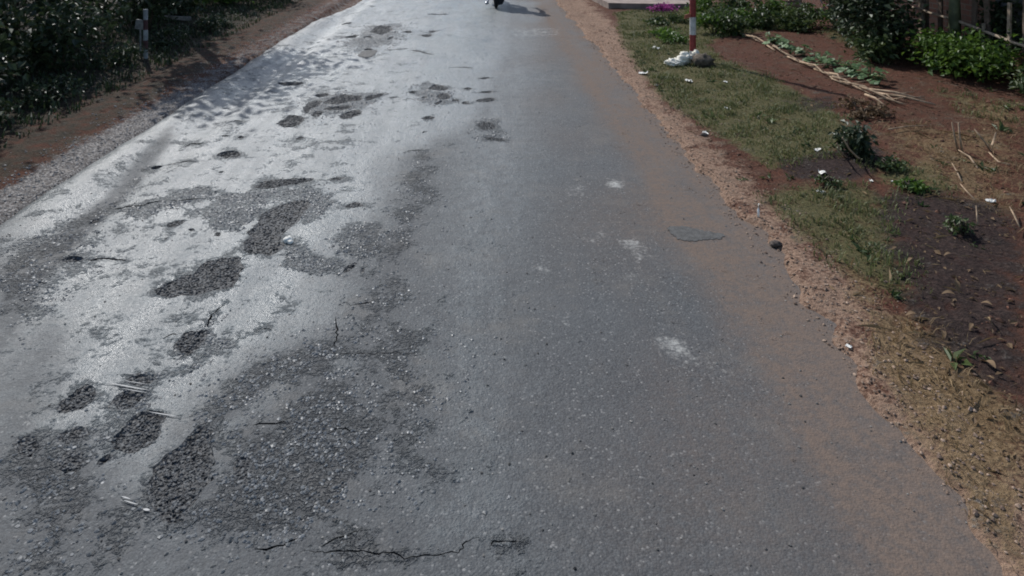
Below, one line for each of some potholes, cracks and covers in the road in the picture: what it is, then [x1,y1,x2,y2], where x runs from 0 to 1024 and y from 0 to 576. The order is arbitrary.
pothole [323,94,363,105]
pothole [244,200,310,256]
pothole [276,115,305,128]
crack [257,531,521,560]
pothole [339,109,362,119]
pothole [154,257,245,298]
pothole [110,410,167,453]
pothole [55,384,97,414]
pothole [477,122,497,130]
pothole [173,330,209,356]
pothole [13,435,39,457]
crack [327,301,412,355]
